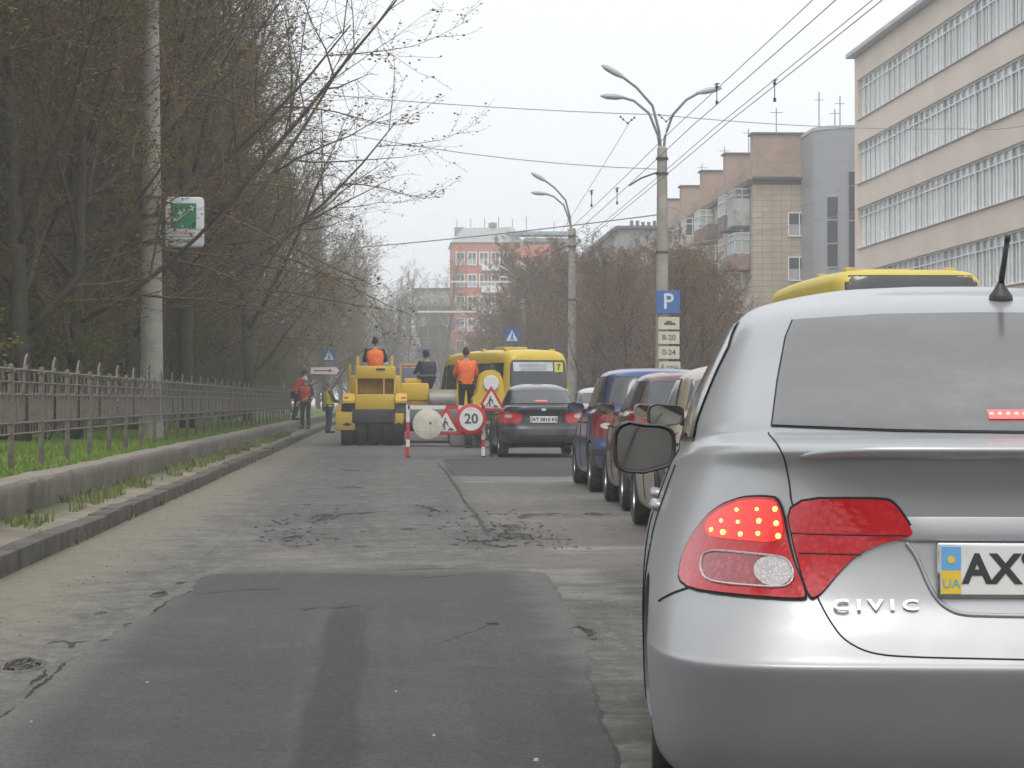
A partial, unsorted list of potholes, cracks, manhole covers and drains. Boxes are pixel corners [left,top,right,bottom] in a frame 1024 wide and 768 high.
crack [254,504,375,547]
pothole [494,532,539,543]
pothole [567,626,597,639]
pothole [0,657,46,674]
